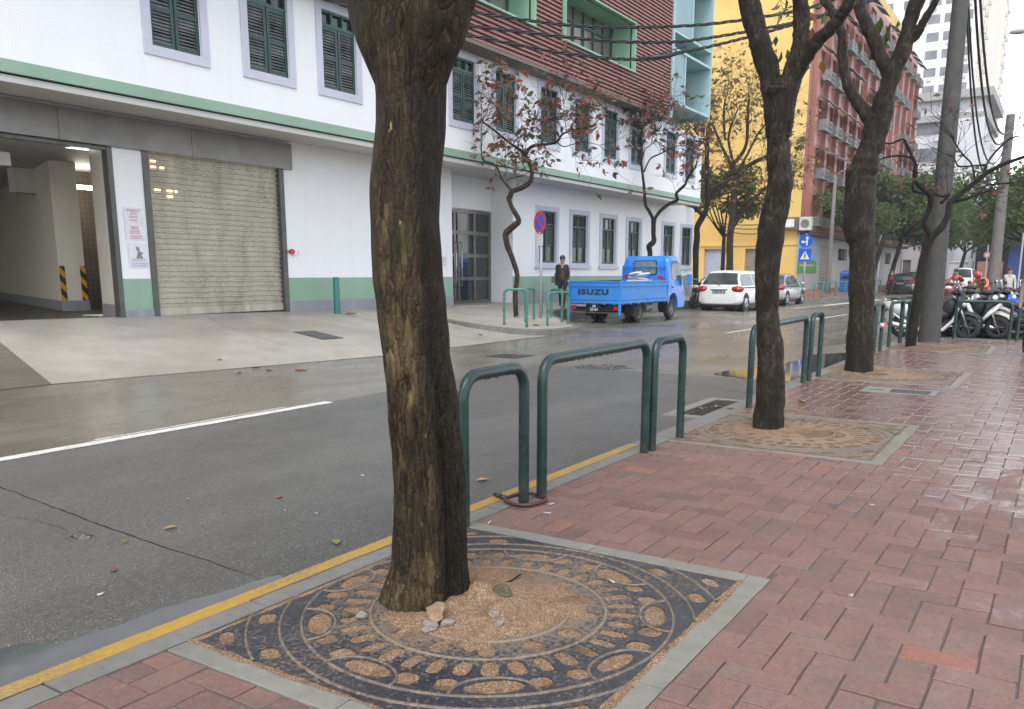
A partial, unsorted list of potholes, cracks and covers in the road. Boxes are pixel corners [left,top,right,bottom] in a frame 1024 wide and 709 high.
crack [0,487,254,576]
